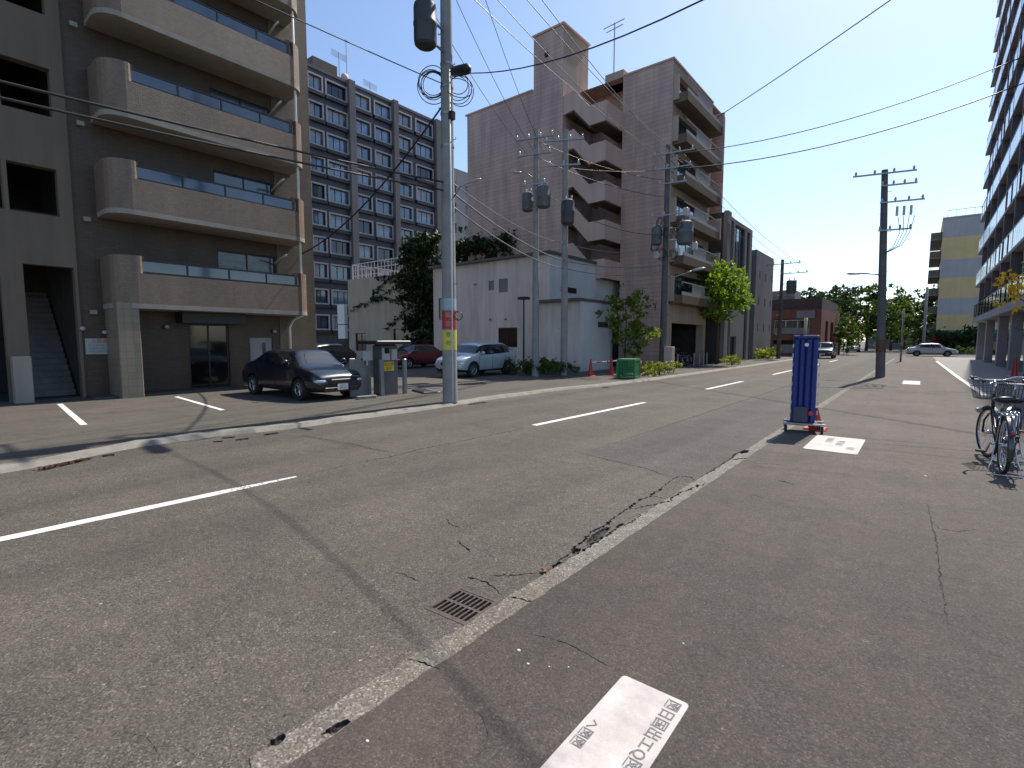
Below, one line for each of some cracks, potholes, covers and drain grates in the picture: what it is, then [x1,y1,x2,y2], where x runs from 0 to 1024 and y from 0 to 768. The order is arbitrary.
pothole [587,527,611,546]
crack [529,633,619,670]
pothole [321,719,351,735]
drain grate [424,587,500,625]
crack [548,450,795,571]
crack [467,573,534,602]
pothole [266,733,286,748]
crack [927,504,975,624]
